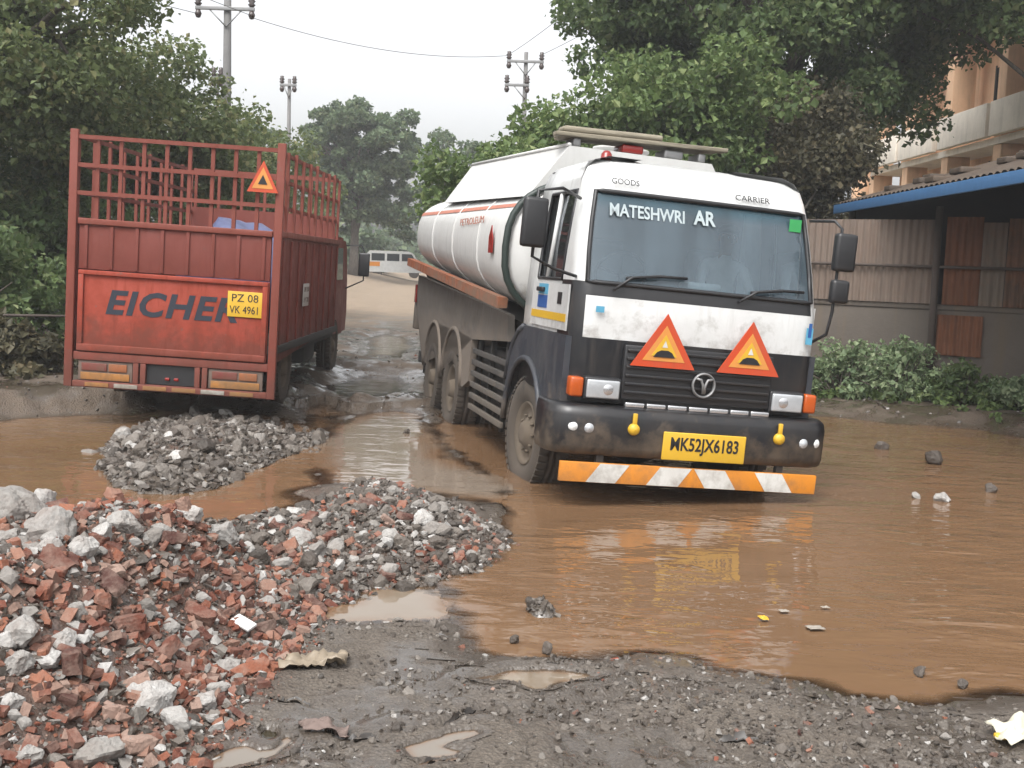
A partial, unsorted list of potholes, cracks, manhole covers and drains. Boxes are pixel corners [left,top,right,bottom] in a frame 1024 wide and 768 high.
pothole [393,387,1024,716]
pothole [266,384,365,433]
pothole [0,392,347,522]
pothole [321,580,458,625]
pothole [393,722,495,765]
pothole [267,393,518,512]
